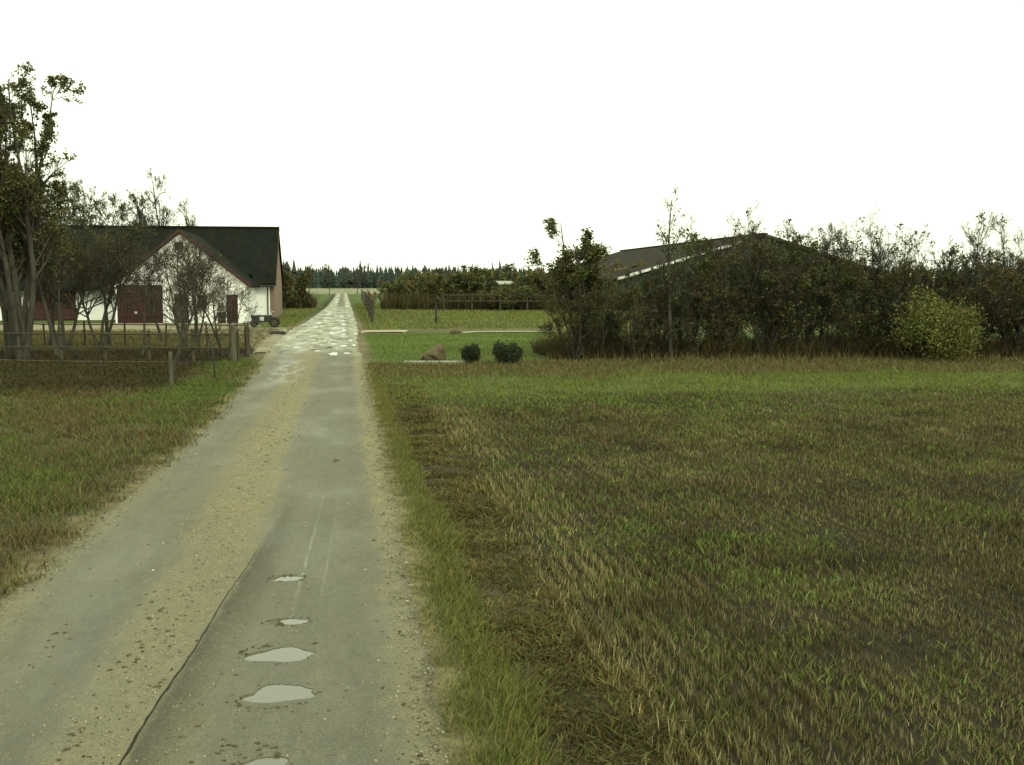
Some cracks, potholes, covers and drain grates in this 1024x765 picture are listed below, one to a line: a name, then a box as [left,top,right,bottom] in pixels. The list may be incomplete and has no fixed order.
pothole [260,616,312,627]
pothole [234,683,316,709]
pothole [237,644,317,664]
pothole [231,753,293,765]
